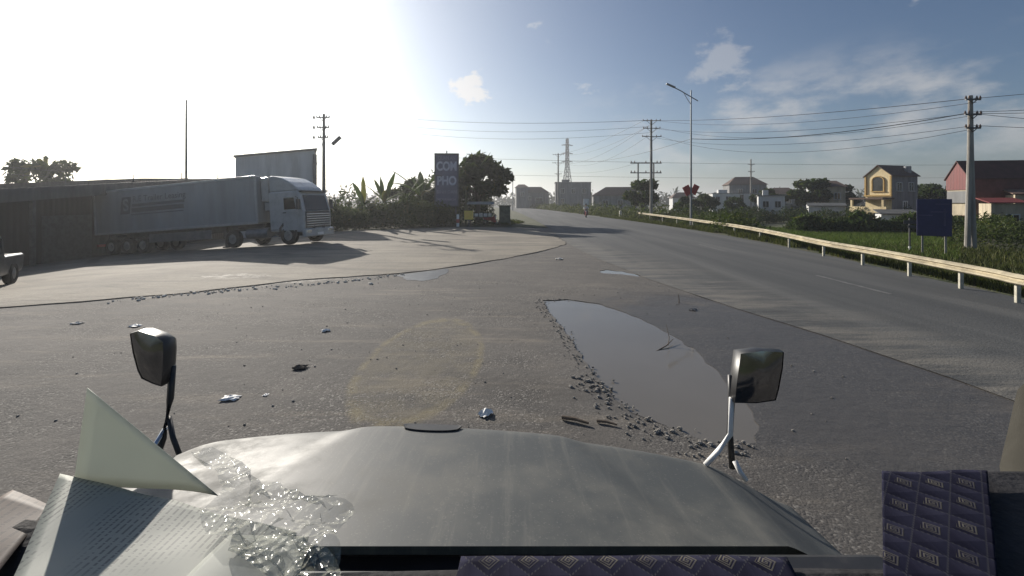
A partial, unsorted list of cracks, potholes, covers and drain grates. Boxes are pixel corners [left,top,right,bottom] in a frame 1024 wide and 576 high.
pothole [543,299,759,445]
